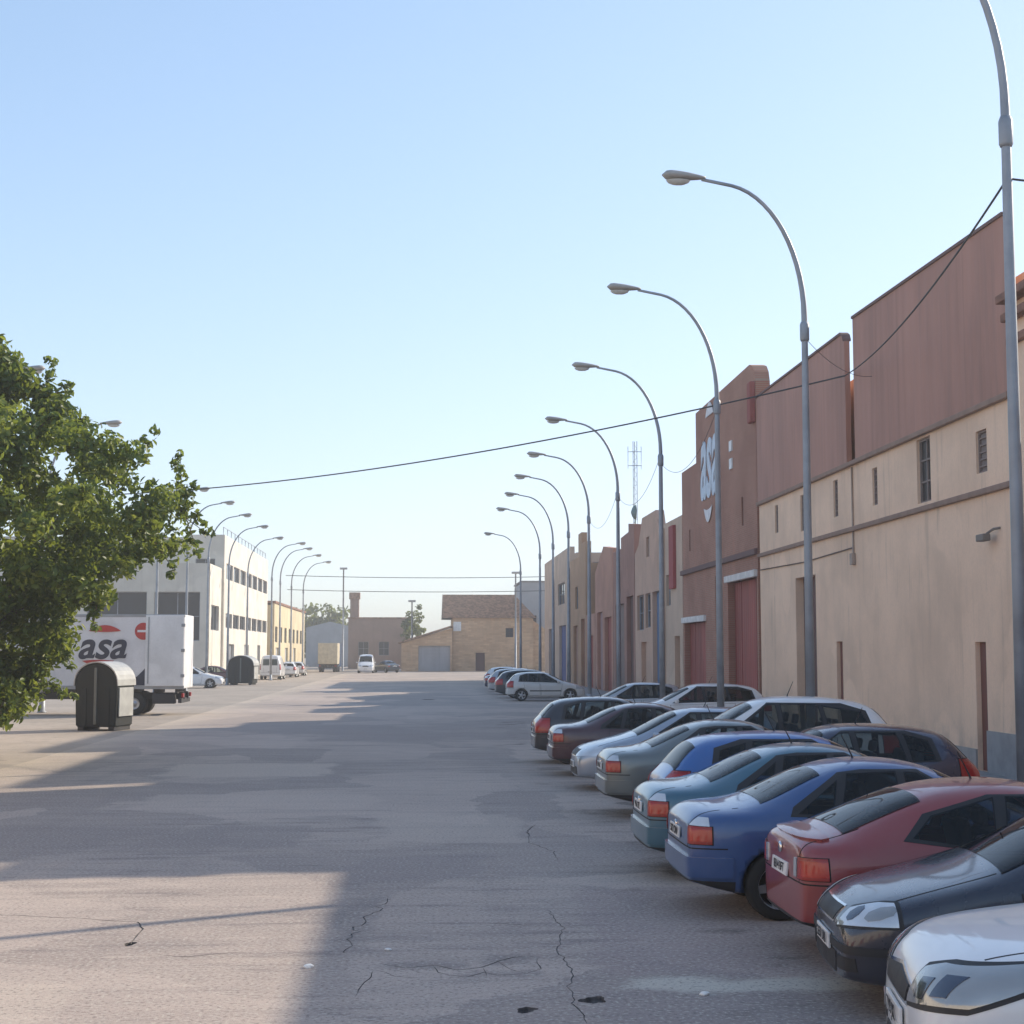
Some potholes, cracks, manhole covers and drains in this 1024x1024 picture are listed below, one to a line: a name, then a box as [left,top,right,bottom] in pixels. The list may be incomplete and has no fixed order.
pothole [578,996,606,1004]
crack [20,915,144,944]
crack [356,911,587,1023]
crack [343,899,388,954]
